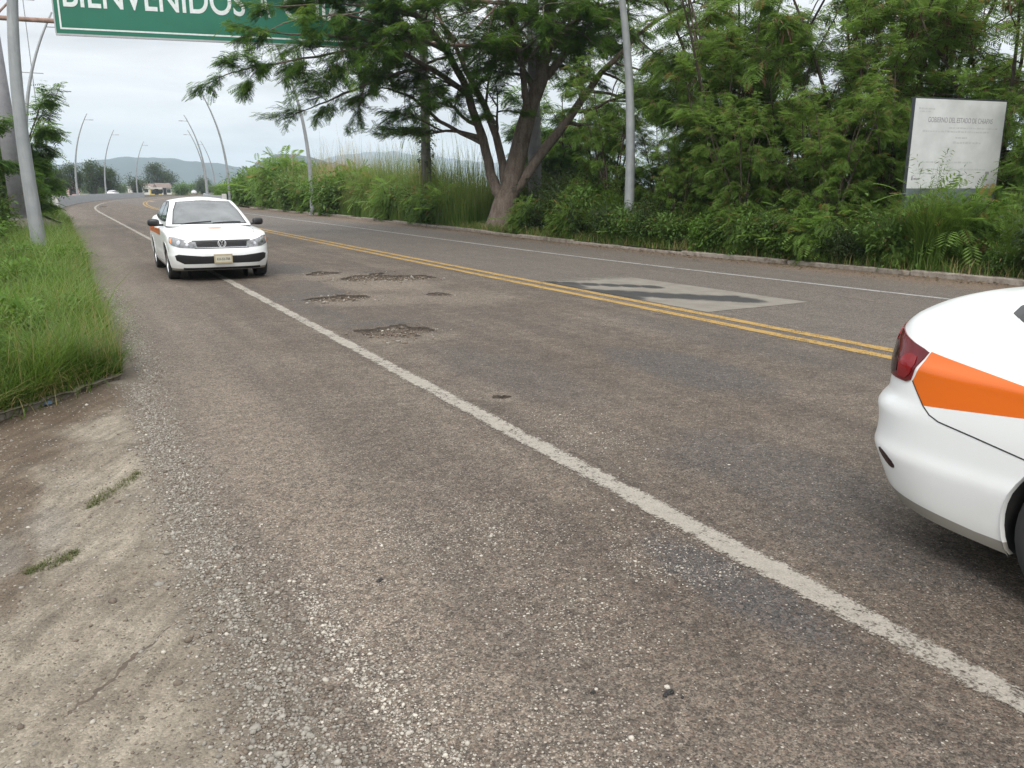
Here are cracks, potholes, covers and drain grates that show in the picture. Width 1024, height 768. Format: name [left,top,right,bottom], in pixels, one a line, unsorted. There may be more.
pothole [353,324,435,339]
pothole [305,294,370,302]
pothole [340,272,437,282]
crack [64,626,171,717]
